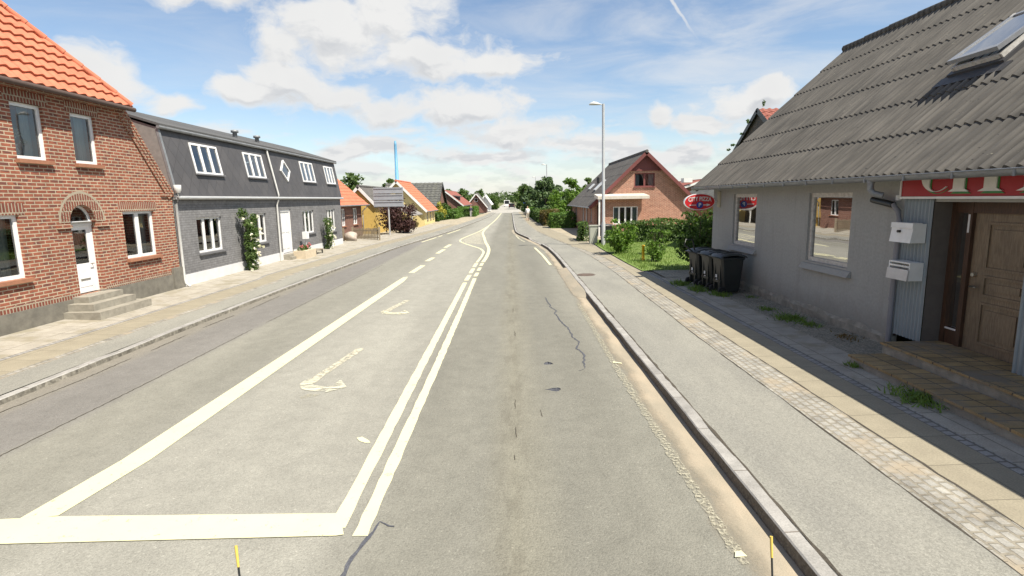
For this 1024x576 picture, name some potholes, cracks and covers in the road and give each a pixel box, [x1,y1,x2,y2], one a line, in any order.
crack [340,521,394,576]
